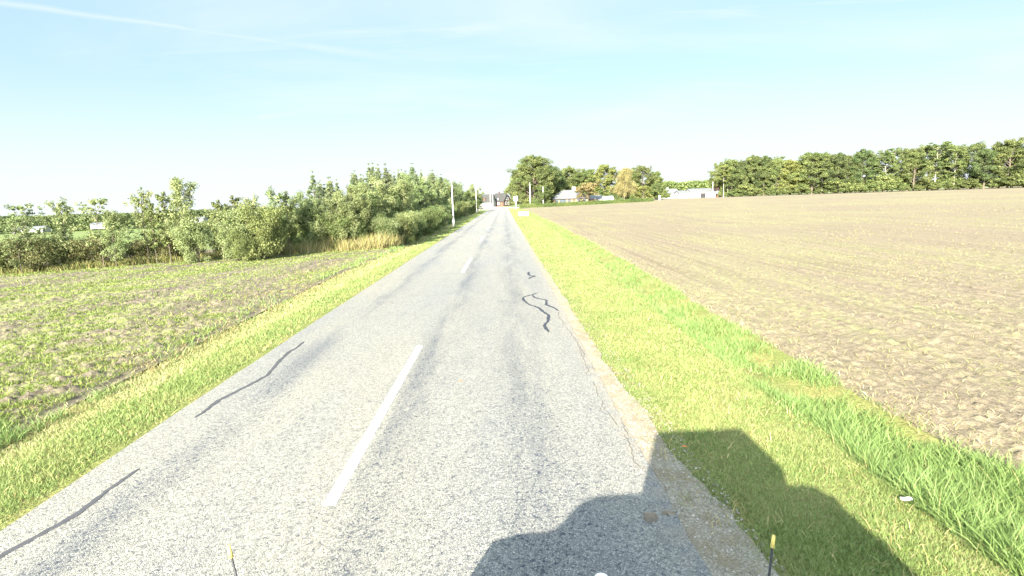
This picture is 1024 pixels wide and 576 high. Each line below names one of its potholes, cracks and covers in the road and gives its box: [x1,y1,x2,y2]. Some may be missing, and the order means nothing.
crack [558,313,642,468]
